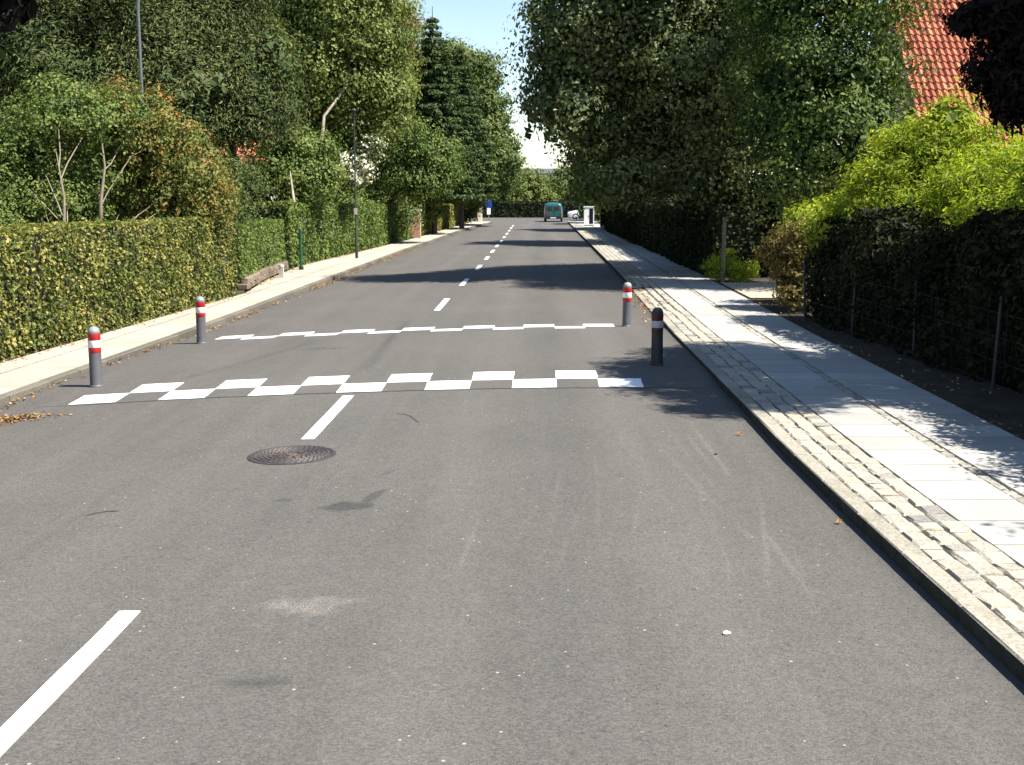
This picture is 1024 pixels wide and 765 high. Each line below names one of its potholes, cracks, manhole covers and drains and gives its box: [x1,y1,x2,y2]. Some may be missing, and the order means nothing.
manhole cover [247,445,336,465]
